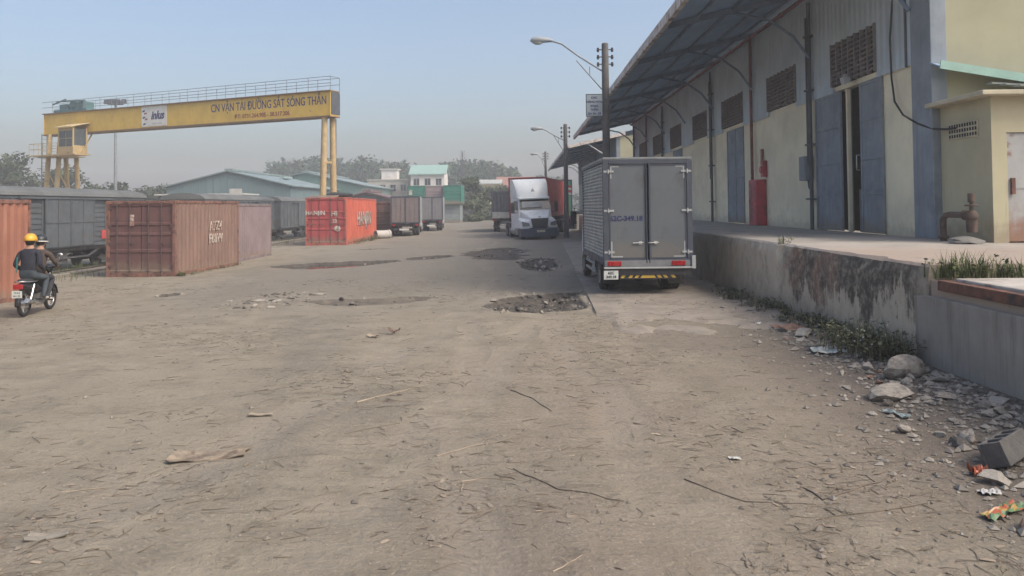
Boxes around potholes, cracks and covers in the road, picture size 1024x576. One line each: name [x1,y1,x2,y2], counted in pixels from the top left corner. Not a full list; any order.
pothole [218,291,439,309]
pothole [458,247,531,262]
pothole [475,290,593,314]
pothole [515,257,564,272]
